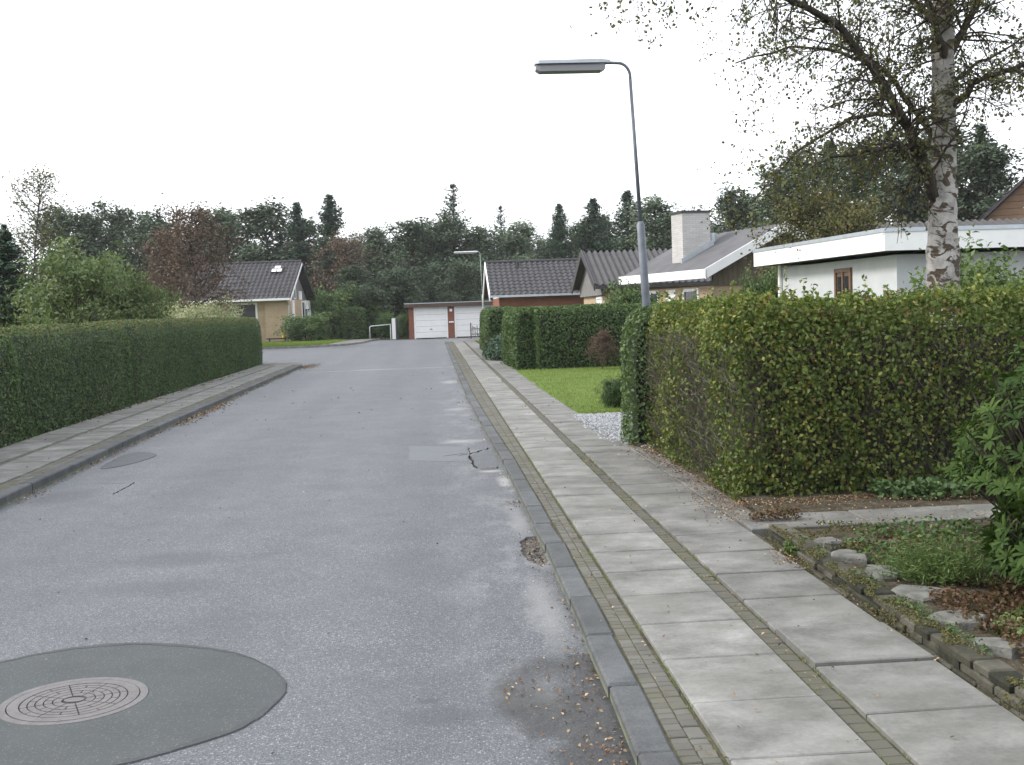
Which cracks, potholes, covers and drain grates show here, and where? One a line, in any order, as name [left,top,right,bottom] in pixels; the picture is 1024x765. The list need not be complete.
manhole cover [0,677,149,726]
pothole [519,536,549,567]
crack [459,448,498,469]
